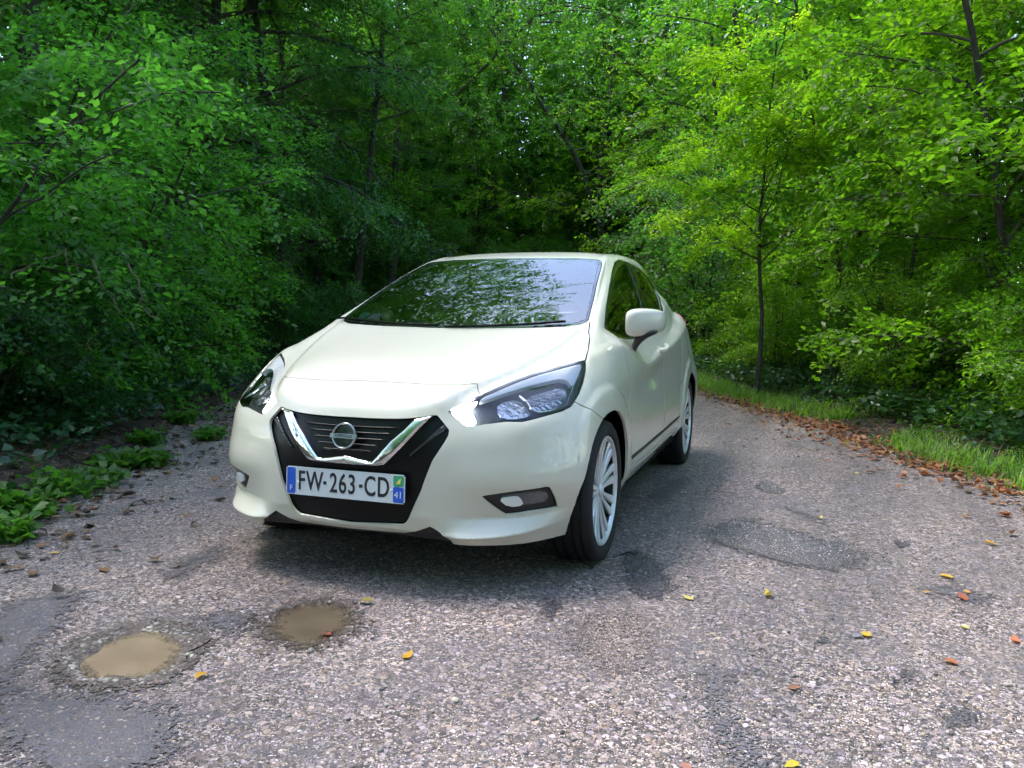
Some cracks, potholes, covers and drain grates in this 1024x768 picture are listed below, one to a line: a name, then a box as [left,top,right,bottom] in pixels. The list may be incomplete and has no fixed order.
pothole [237,591,378,662]
pothole [41,617,219,695]
